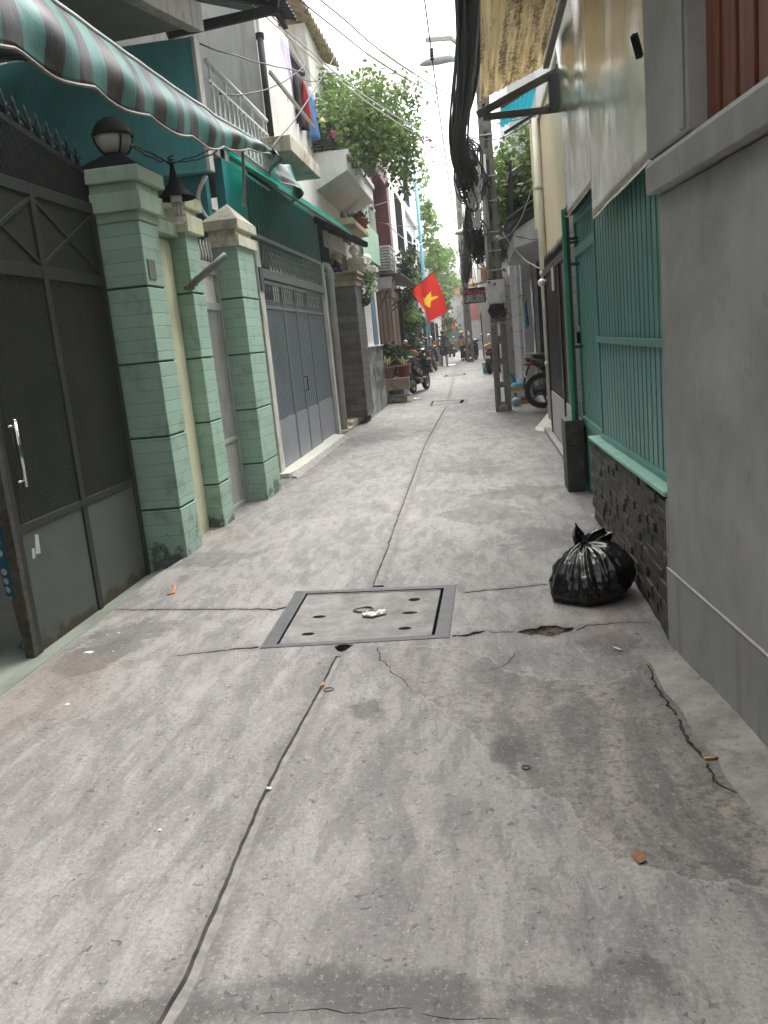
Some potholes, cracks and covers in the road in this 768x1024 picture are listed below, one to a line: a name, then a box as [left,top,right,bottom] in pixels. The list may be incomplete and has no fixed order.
crack [259,1007,501,1020]
pothole [518,625,575,636]
manhole cover [260,585,456,649]
crack [647,665,737,793]
crack [377,647,515,693]
